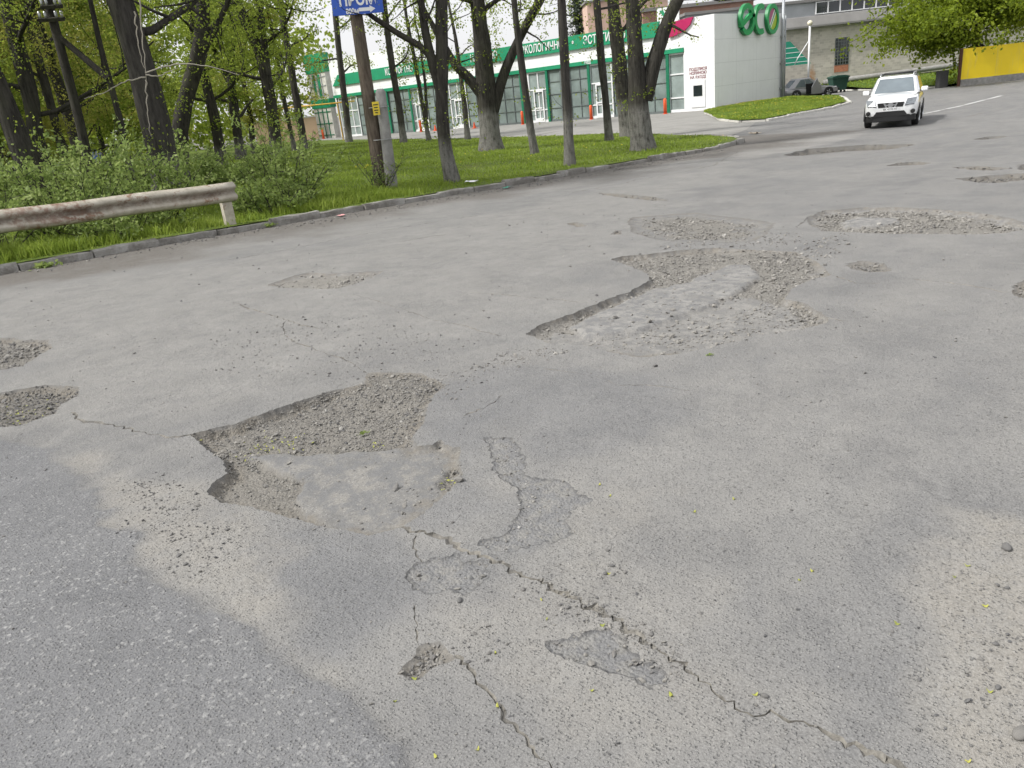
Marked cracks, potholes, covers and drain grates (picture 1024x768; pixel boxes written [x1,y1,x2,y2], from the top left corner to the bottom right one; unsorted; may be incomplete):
crack [233,302,366,373]
pothole [526,248,832,358]
crack [399,525,907,768]
pothole [397,641,456,680]
crack [70,412,190,438]
pothole [545,628,668,690]
pothole [268,271,383,289]
pothole [786,144,913,156]
pothole [477,436,593,553]
pothole [956,173,1024,183]
pothole [805,207,1024,234]
pothole [627,213,776,243]
